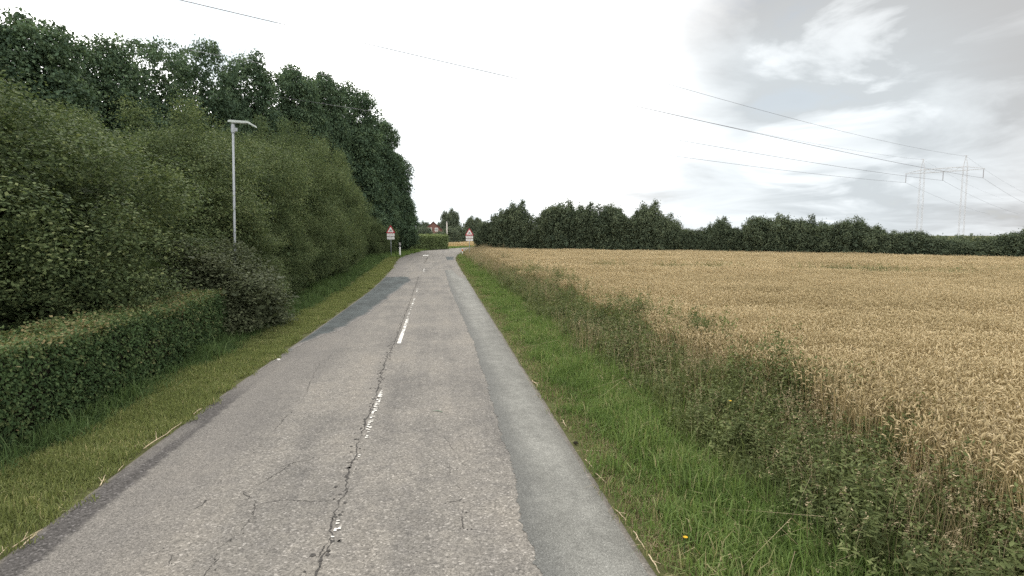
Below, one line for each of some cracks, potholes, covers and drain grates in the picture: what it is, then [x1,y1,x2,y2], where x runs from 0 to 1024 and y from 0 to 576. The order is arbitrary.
crack [204,279,418,576]
